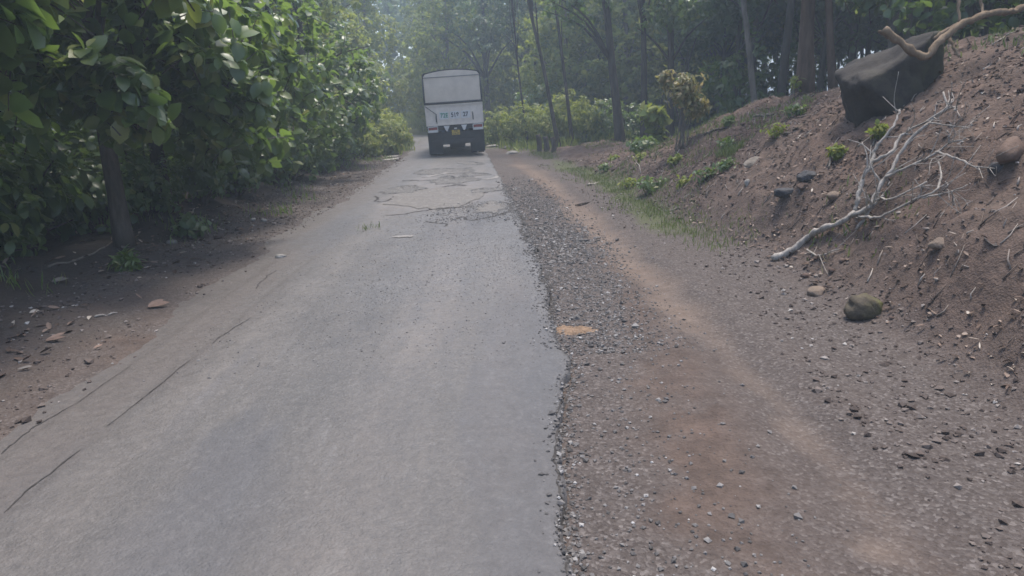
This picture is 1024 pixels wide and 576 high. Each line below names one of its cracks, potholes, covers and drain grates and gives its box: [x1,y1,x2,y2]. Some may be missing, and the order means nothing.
crack [1,366,130,454]
crack [374,180,557,320]
